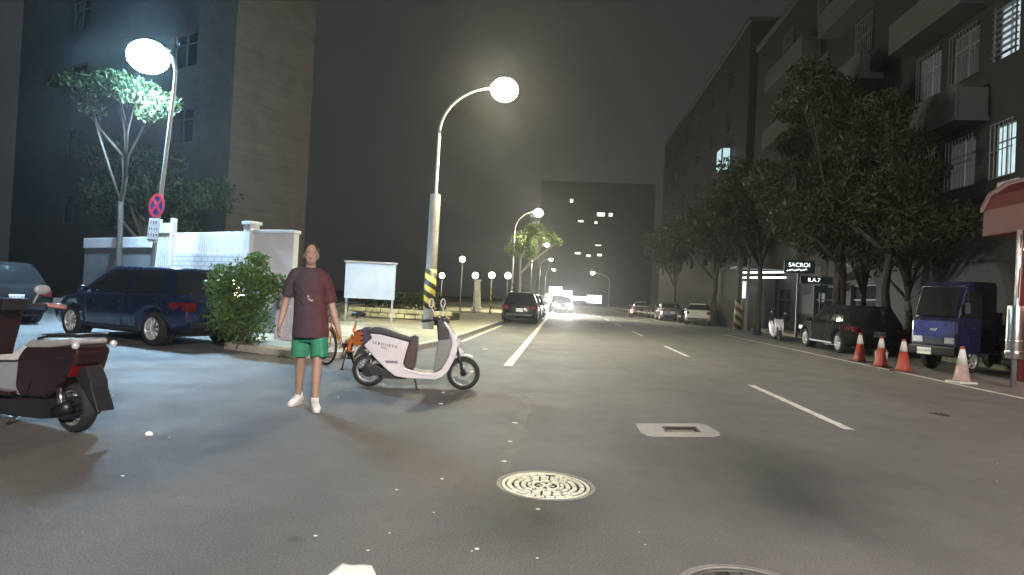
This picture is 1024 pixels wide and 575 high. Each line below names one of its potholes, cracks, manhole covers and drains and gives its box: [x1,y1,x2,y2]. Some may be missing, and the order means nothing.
manhole cover [679,564,781,575]
manhole cover [635,423,720,437]
manhole cover [496,471,595,501]
